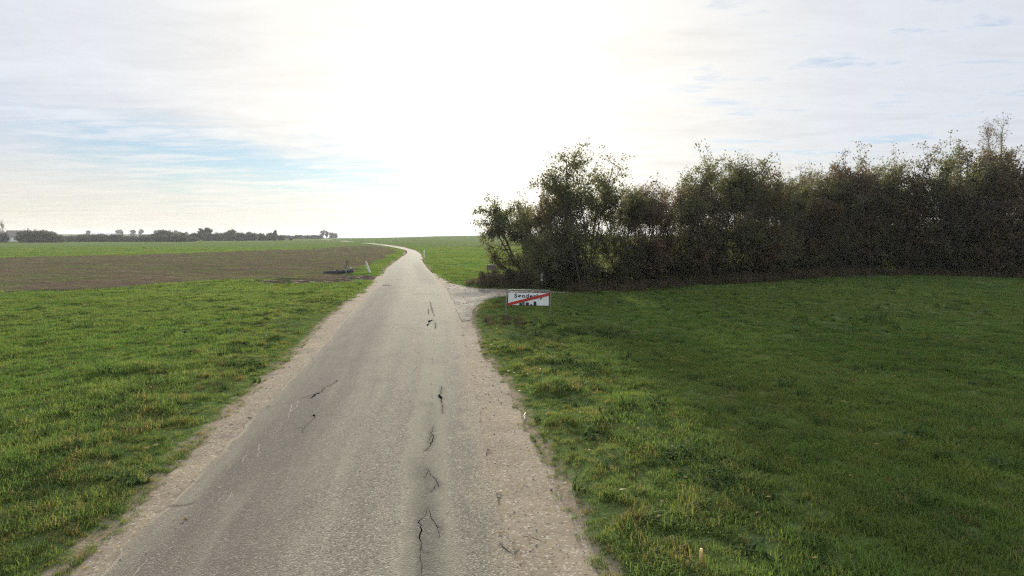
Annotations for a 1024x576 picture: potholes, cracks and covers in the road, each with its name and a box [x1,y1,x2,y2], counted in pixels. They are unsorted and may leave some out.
crack [242,380,337,462]
crack [418,510,440,576]
